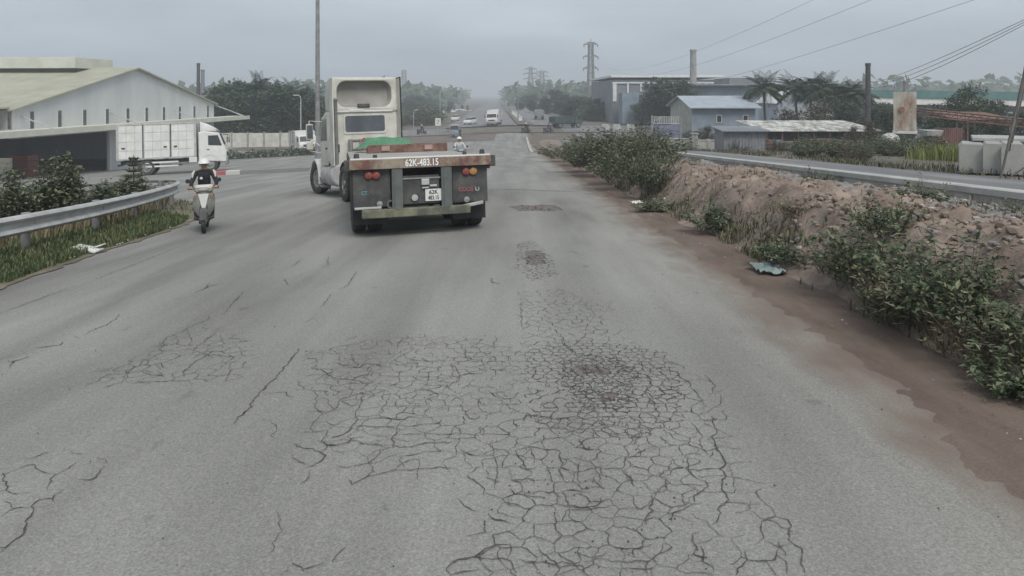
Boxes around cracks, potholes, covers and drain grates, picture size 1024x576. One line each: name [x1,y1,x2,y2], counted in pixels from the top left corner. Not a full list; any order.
crack [0,450,107,552]
pothole [522,250,547,266]
crack [234,348,299,438]
pothole [572,364,612,375]
crack [293,288,805,576]
pothole [599,392,619,402]
crack [90,298,255,386]
